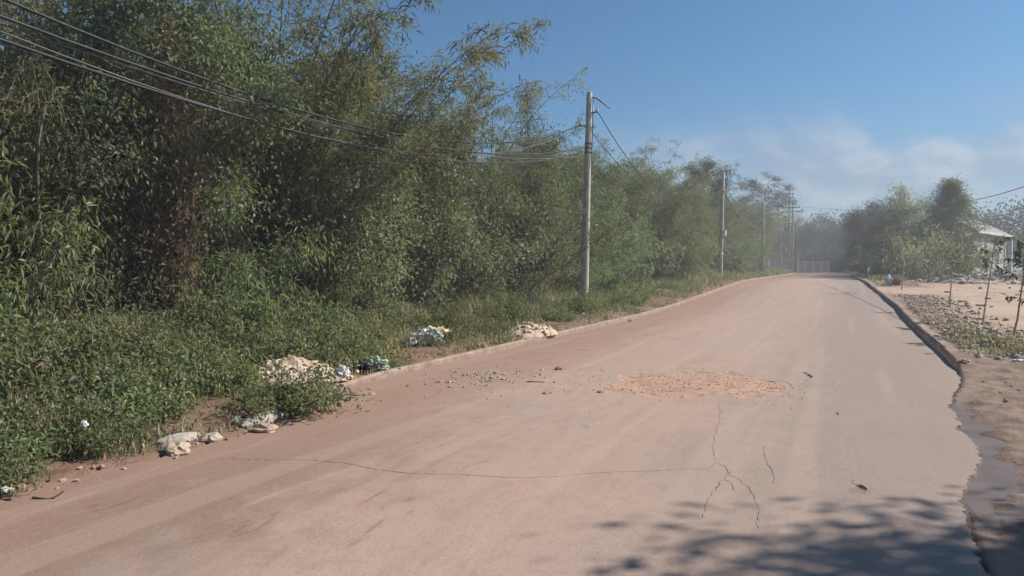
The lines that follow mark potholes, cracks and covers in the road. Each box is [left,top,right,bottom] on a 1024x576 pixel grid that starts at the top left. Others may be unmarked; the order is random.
crack [216,458,682,478]
pothole [601,370,787,399]
crack [700,406,775,529]
